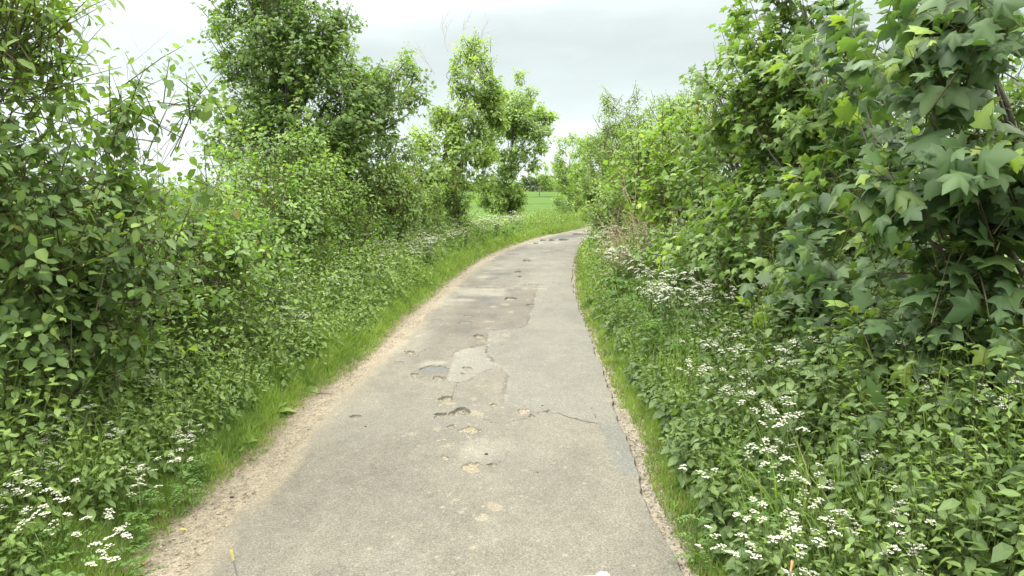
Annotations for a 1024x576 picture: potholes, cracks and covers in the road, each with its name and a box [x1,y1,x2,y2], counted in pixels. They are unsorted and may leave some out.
pothole [459,462,482,473]
pothole [419,365,450,374]
crack [481,411,598,424]
pothole [457,425,482,434]
pothole [445,407,471,417]
